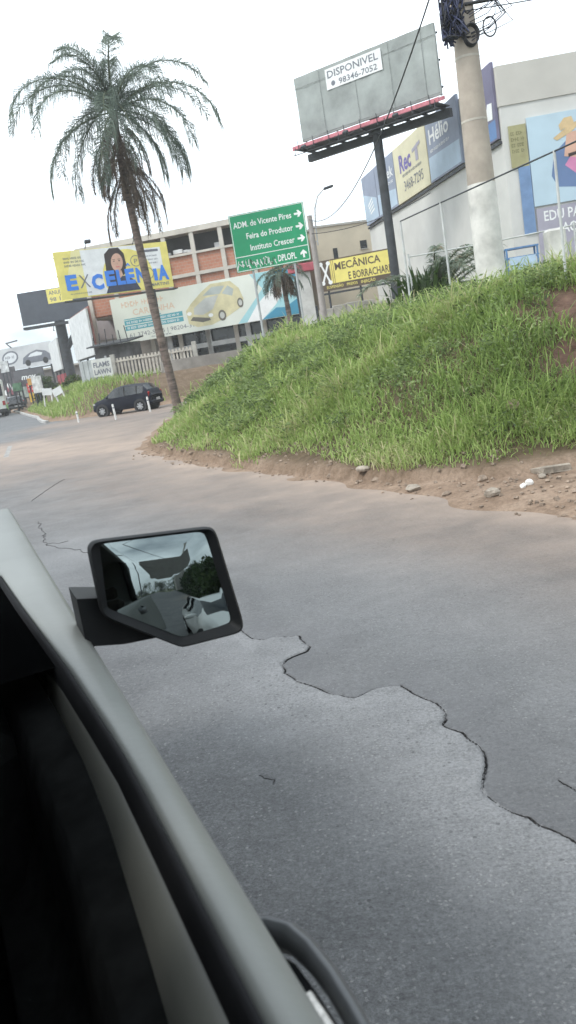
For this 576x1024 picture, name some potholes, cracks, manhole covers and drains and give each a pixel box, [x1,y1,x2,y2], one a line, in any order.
crack [241,630,576,844]
